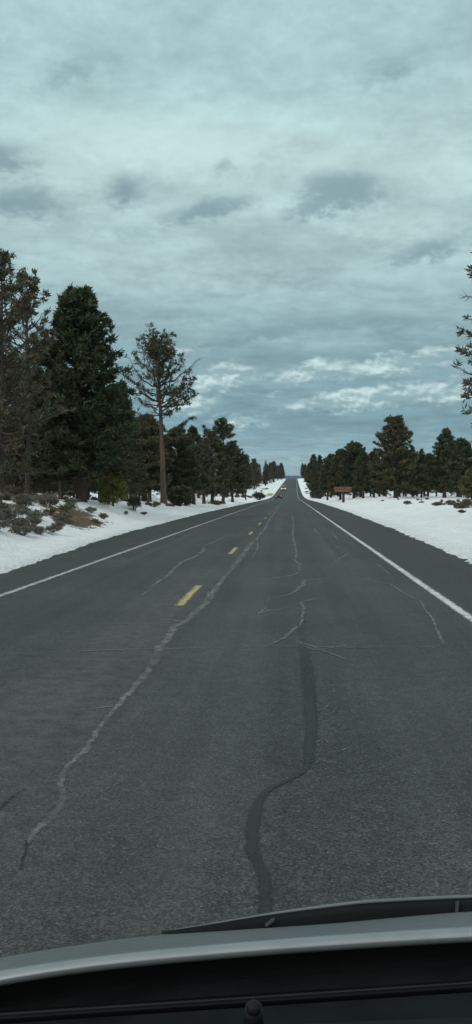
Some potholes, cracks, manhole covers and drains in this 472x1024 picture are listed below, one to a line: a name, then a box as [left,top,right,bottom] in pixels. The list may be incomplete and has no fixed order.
crack [23,511,443,854]
